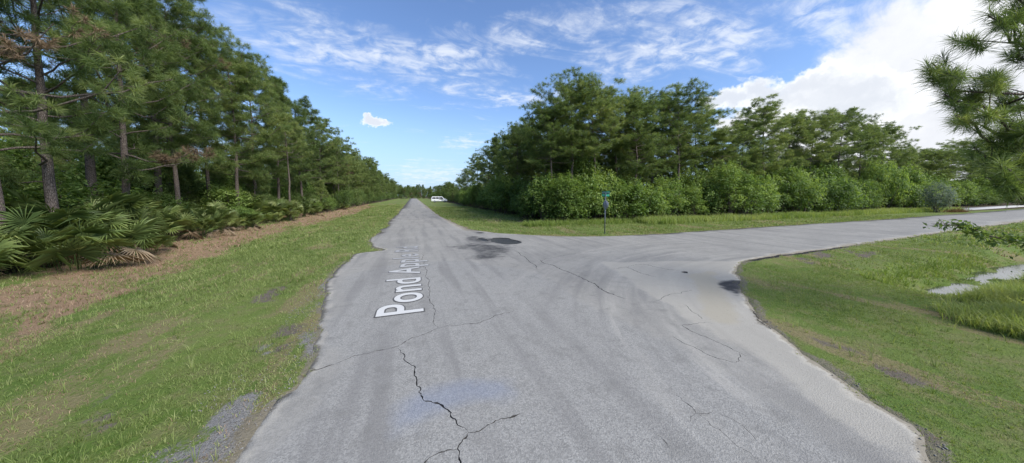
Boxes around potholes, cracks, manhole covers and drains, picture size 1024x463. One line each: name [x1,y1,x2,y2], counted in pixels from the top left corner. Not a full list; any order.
crack [656,291,741,362]
crack [681,399,756,457]
crack [311,254,519,463]
